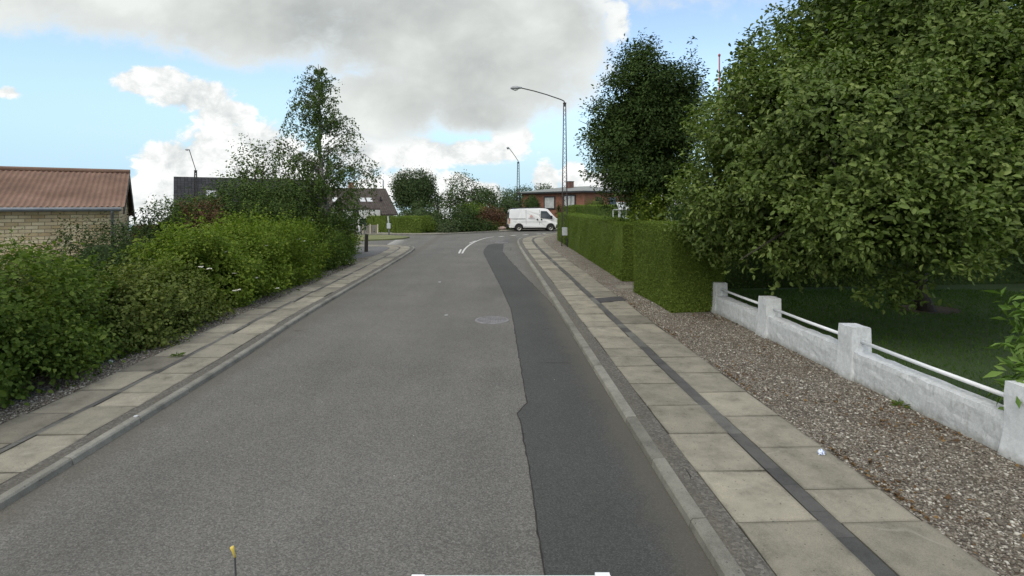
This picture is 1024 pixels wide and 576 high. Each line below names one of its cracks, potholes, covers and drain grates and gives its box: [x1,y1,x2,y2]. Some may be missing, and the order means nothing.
manhole cover [475,316,509,324]
